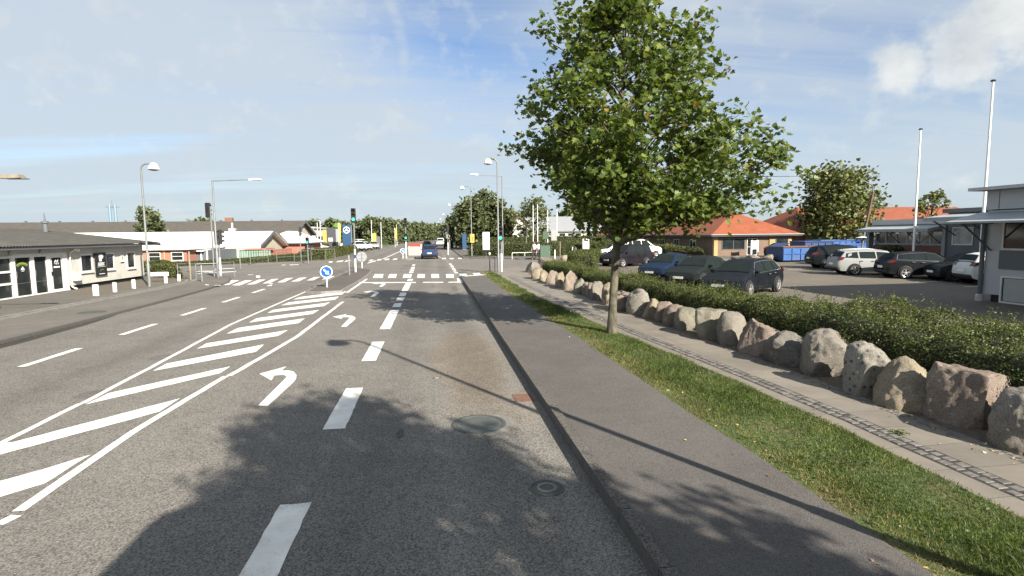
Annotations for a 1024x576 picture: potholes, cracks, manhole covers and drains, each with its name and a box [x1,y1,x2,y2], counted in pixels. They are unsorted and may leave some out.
drain grate [512,393,534,402]
manhole cover [451,414,515,436]
manhole cover [529,480,564,497]
